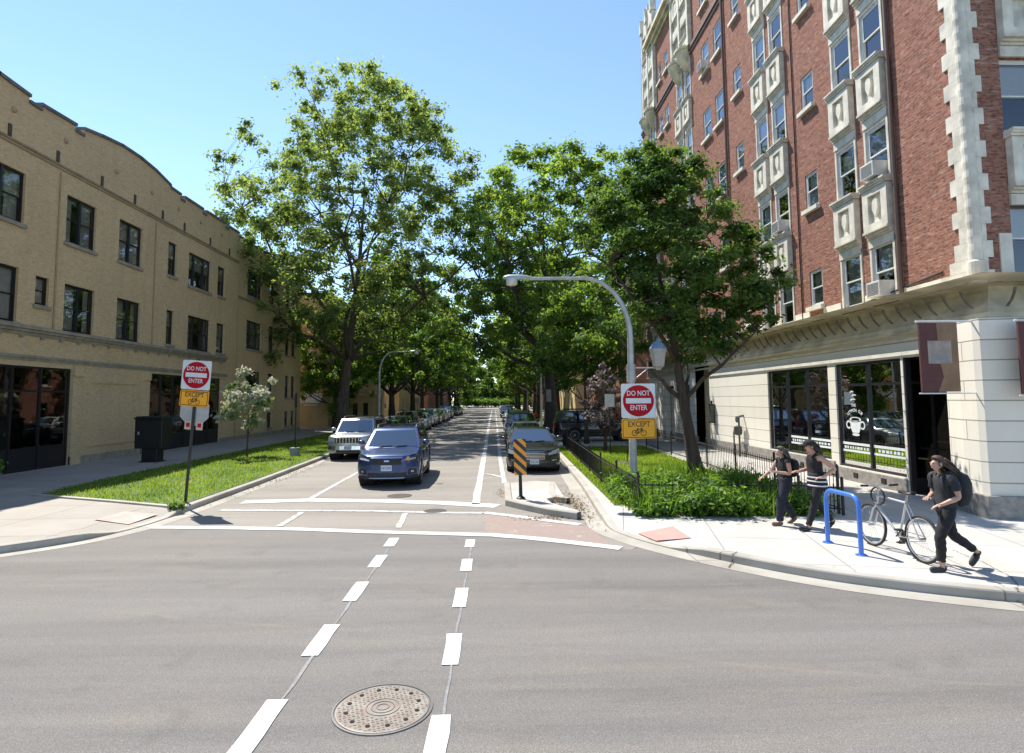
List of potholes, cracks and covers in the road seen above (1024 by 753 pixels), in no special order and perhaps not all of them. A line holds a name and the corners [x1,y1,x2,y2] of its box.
manhole cover [331,684,433,736]
